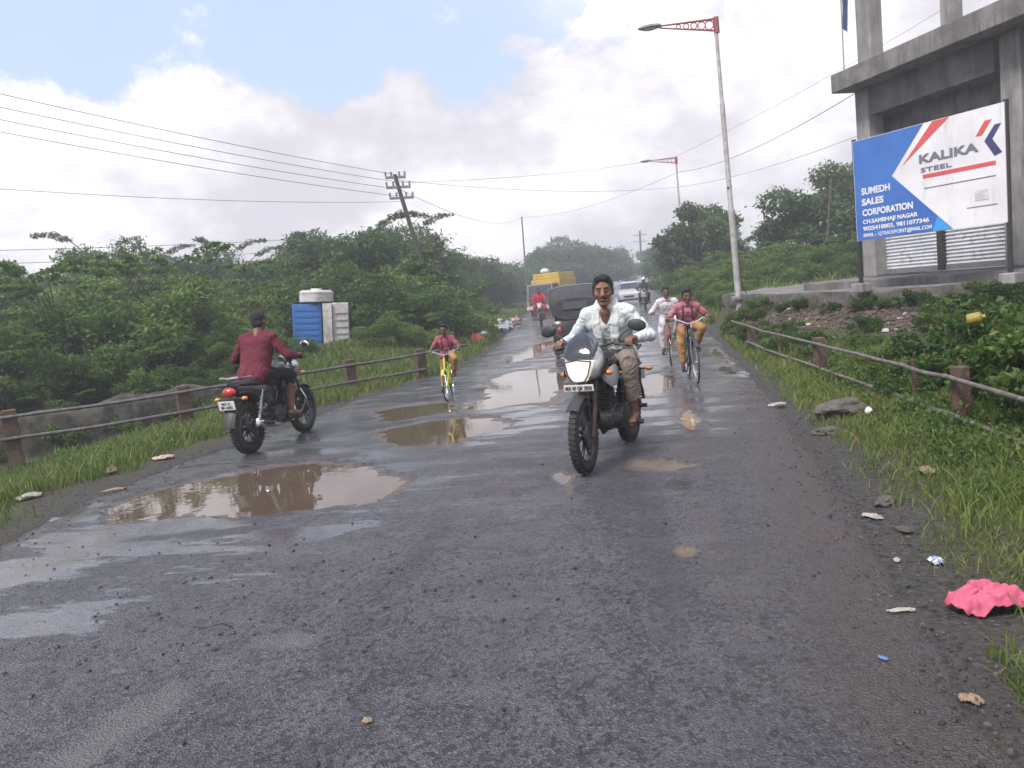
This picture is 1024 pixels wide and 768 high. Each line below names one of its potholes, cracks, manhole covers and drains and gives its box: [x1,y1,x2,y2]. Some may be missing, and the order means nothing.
pothole [458,367,572,412]
pothole [367,400,464,422]
pothole [549,470,577,495]
pothole [641,371,683,397]
pothole [94,458,419,524]
pothole [619,456,704,472]
pothole [369,414,524,447]
pothole [668,544,700,559]
pothole [676,409,703,430]
